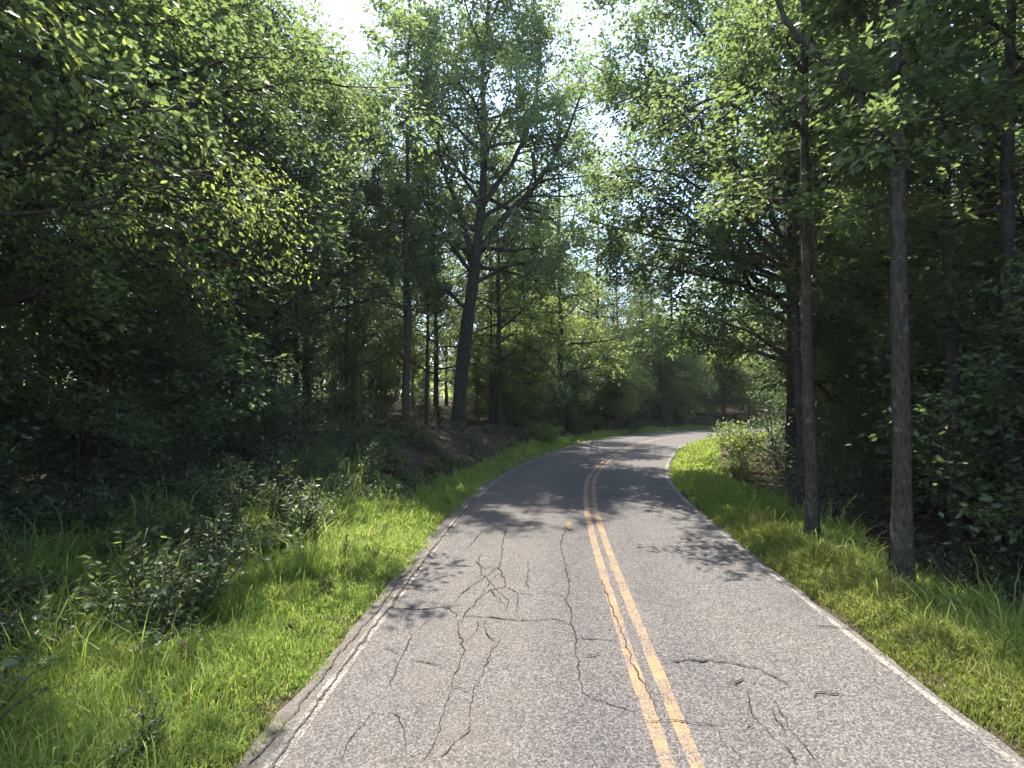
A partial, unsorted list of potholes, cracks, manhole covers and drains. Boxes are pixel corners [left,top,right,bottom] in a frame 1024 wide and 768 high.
crack [246,497,816,768]
